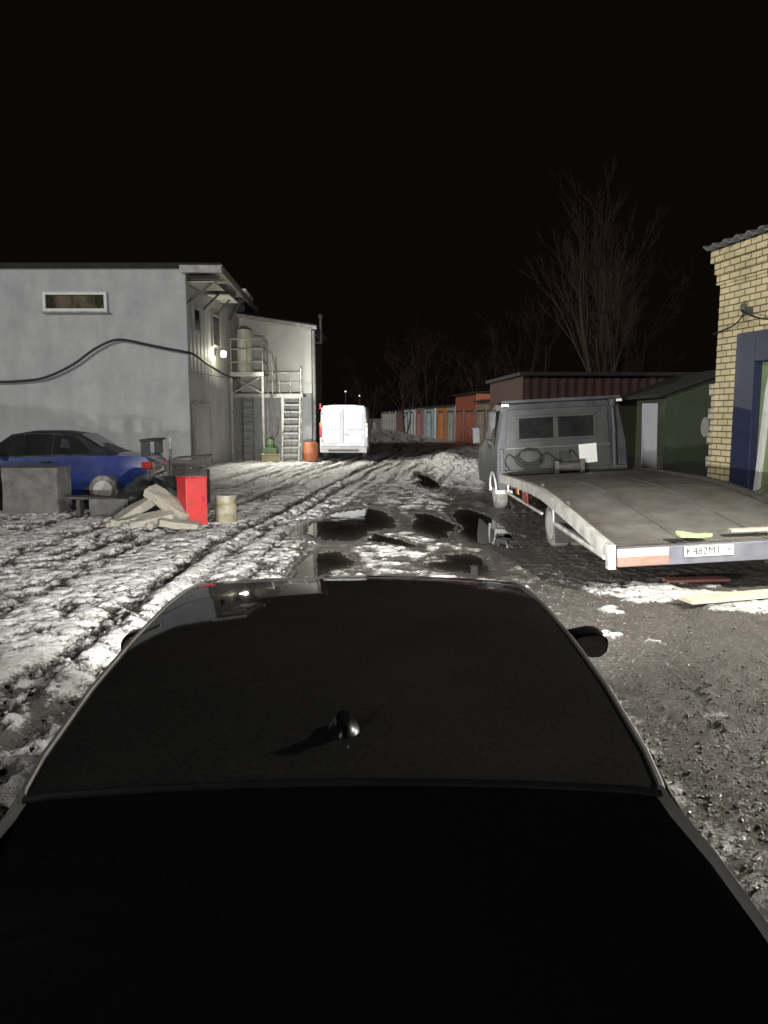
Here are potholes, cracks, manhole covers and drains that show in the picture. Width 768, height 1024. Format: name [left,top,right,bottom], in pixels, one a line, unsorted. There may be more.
pothole [415,473,443,489]
pothole [423,551,499,577]
pothole [303,507,402,542]
pothole [293,550,359,577]
pothole [407,511,464,540]
pothole [450,507,523,551]
